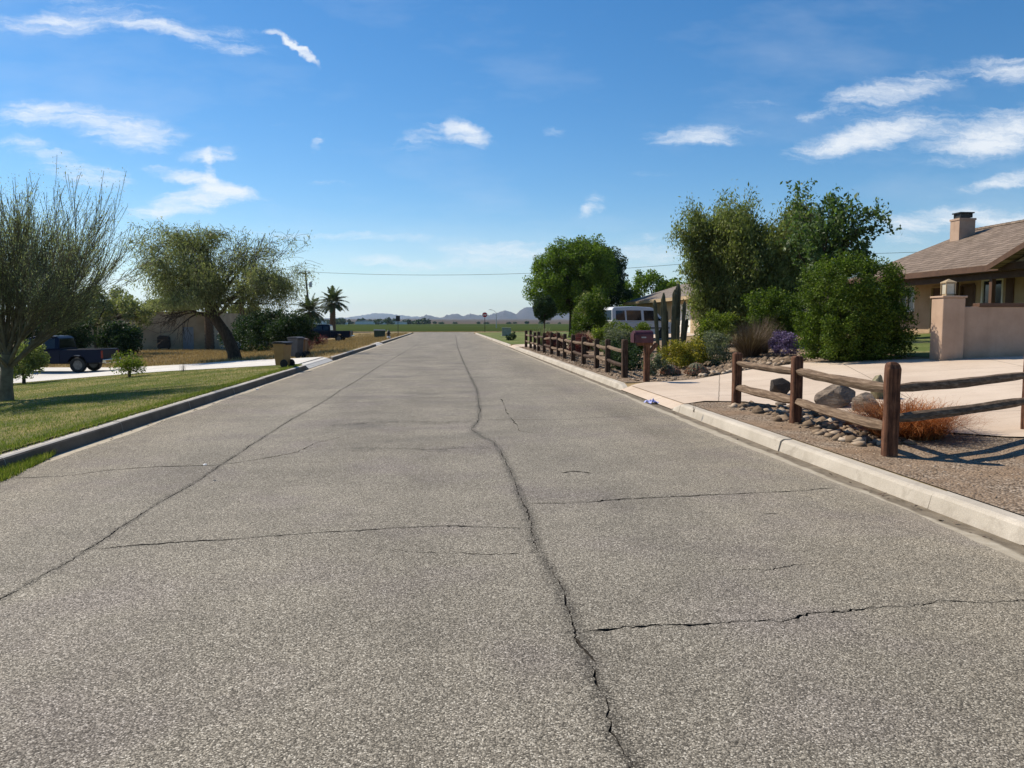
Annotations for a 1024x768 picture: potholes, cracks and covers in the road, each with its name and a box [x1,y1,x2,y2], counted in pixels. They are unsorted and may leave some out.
crack [105,525,522,549]
crack [10,437,339,479]
crack [582,600,1024,633]
crack [542,488,827,504]
